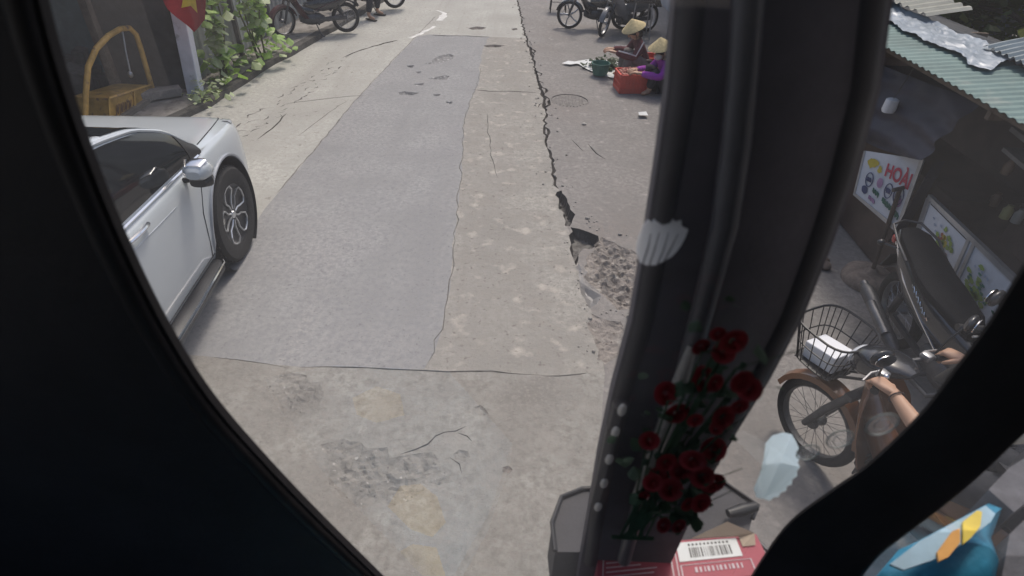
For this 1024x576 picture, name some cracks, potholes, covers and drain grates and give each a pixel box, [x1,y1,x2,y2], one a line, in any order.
crack [236,40,397,139]
manhole cover [549,94,590,108]
crack [402,426,470,473]
pothole [426,54,454,64]
pothole [584,237,638,310]
crack [427,0,605,364]
pothole [575,265,601,309]
pothole [569,227,599,264]
